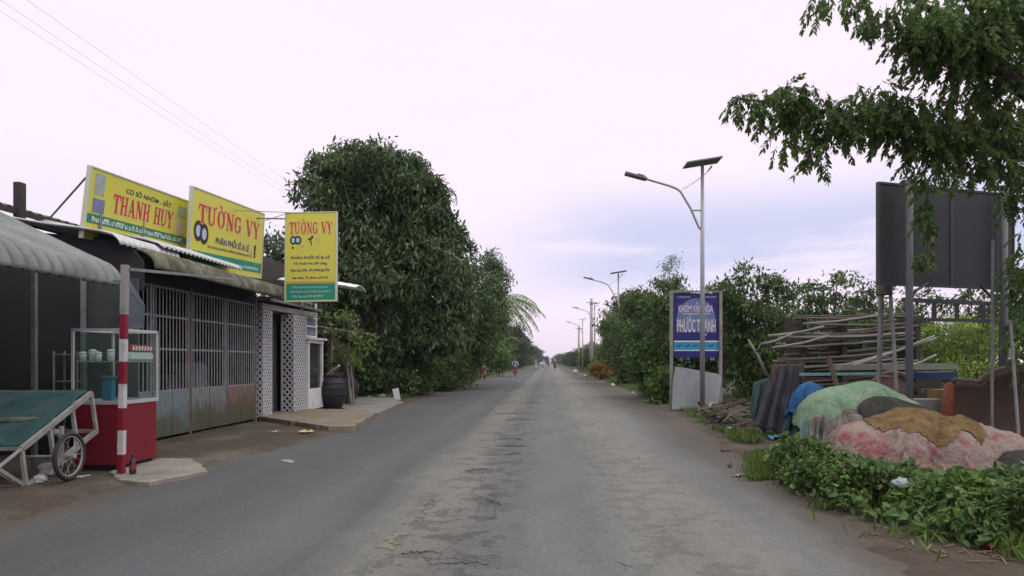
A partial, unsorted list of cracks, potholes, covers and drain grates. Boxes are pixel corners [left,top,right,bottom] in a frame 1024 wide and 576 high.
crack [413,551,478,569]
